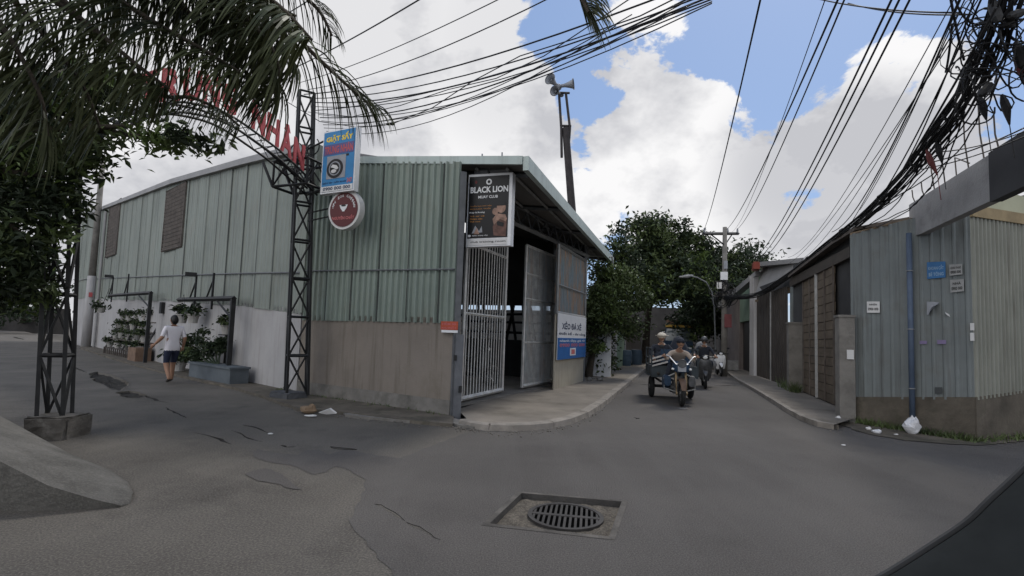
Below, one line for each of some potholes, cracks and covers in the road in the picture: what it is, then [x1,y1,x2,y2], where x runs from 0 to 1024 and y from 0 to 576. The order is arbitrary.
crack [376,504,440,540]
pothole [115,390,146,398]
crack [145,396,287,447]
pothole [87,371,130,392]
